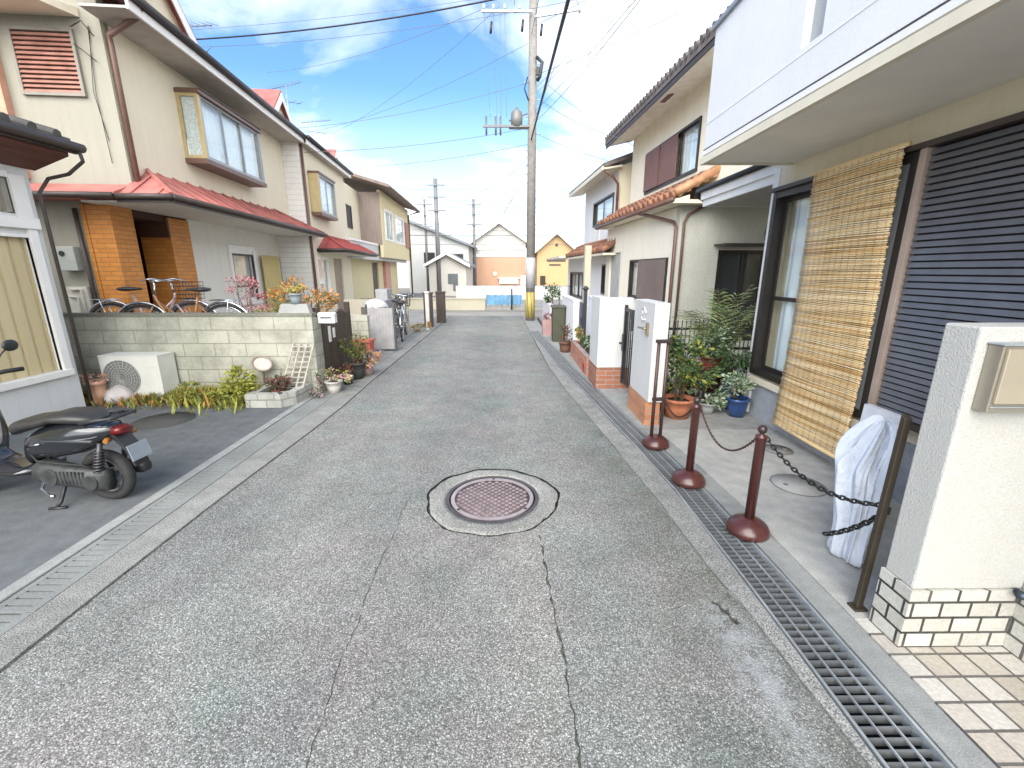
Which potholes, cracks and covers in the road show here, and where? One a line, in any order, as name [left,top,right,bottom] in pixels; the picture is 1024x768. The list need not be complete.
crack [539,535,581,768]
drain grate [674,488,786,583]
manhole cover [427,469,560,537]
manhole cover [770,473,828,497]
drain grate [629,439,703,491]
drain grate [744,578,955,768]
manhole cover [765,444,794,455]
manhole cover [130,412,197,430]
